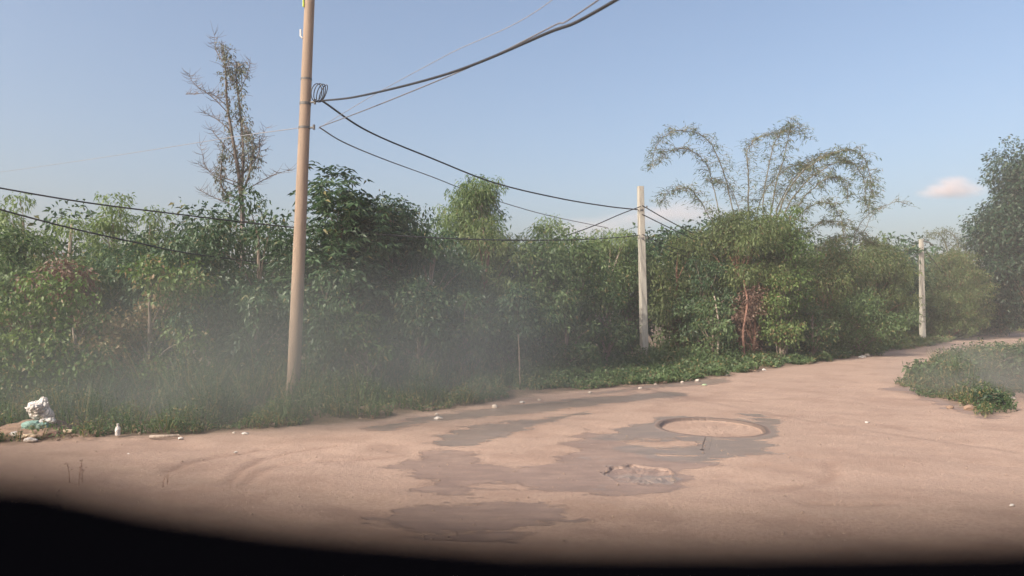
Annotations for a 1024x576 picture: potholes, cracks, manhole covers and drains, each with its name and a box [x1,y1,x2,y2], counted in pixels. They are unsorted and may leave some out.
pothole [600,463,680,487]
